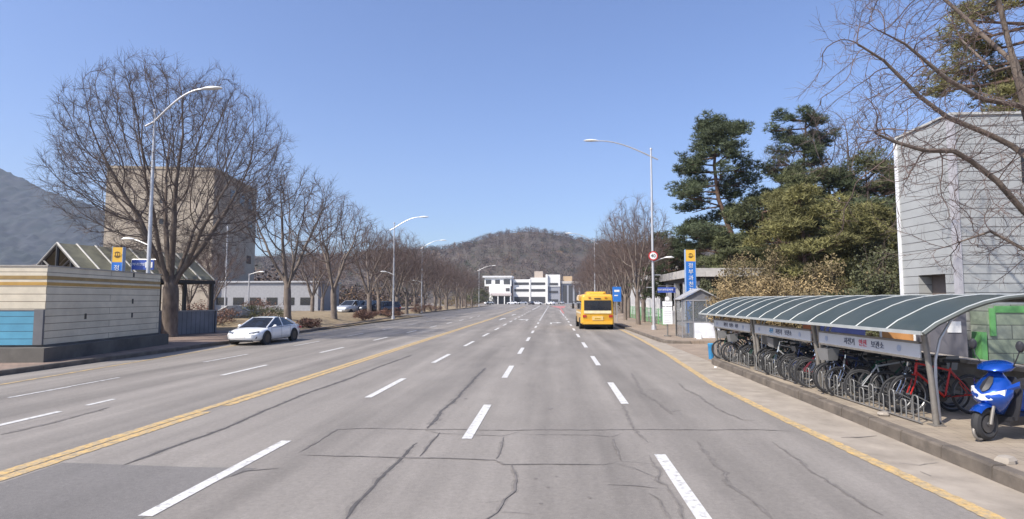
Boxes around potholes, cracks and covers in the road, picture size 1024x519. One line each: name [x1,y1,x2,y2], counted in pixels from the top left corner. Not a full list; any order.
crack [298,368,879,519]
